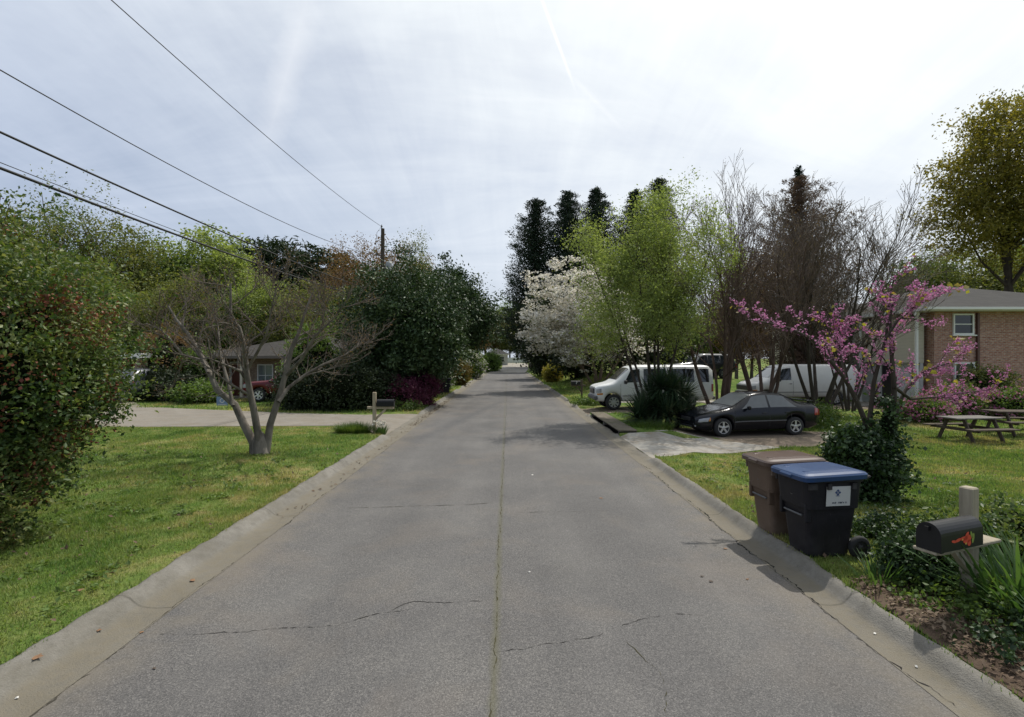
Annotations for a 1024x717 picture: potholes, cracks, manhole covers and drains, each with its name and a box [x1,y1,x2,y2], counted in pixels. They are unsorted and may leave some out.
drain grate [591,412,637,435]
crack [498,613,690,710]
crack [205,601,448,634]
